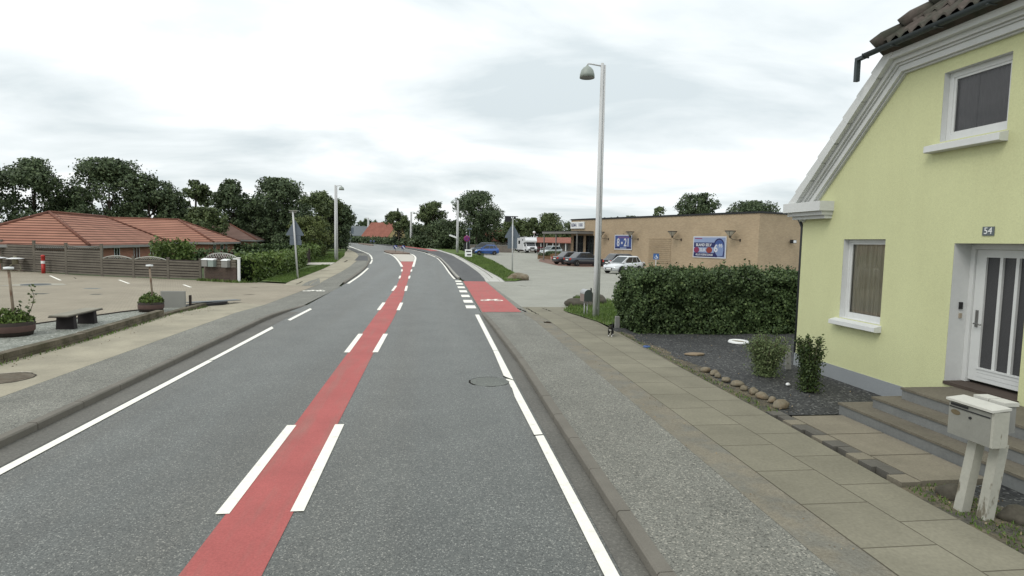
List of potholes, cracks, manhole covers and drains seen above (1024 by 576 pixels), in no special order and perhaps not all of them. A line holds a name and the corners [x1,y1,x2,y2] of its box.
manhole cover [0,372,37,384]
manhole cover [468,377,509,386]
